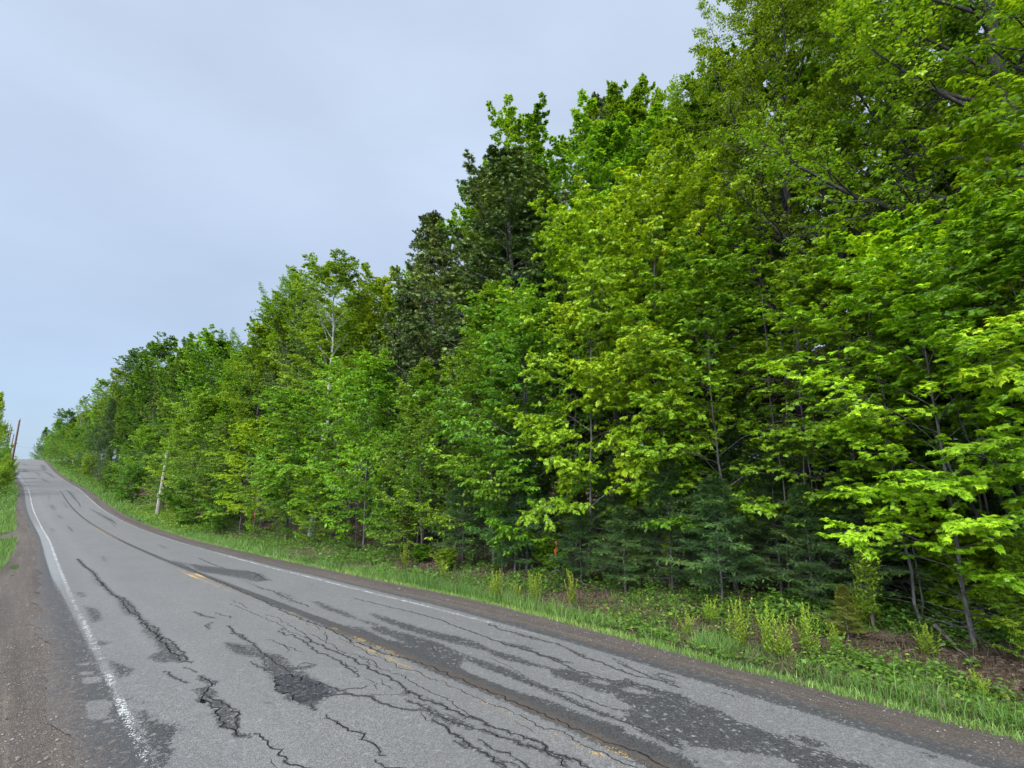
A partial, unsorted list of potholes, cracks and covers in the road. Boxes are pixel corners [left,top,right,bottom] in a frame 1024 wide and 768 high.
crack [231,600,637,768]
crack [77,559,308,768]
